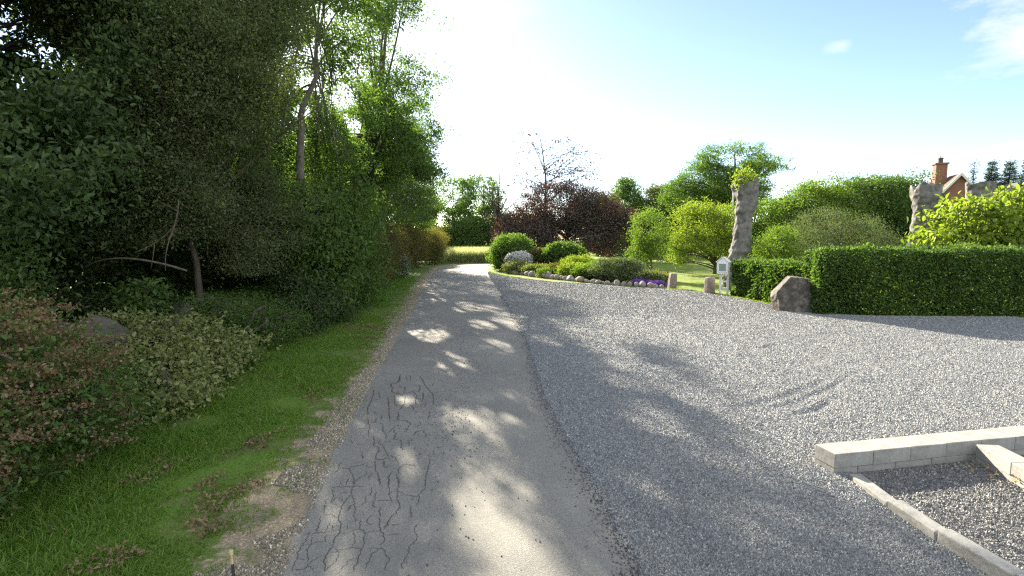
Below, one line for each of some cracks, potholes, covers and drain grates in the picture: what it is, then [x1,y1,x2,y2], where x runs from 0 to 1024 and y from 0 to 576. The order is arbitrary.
crack [292,371,434,572]
